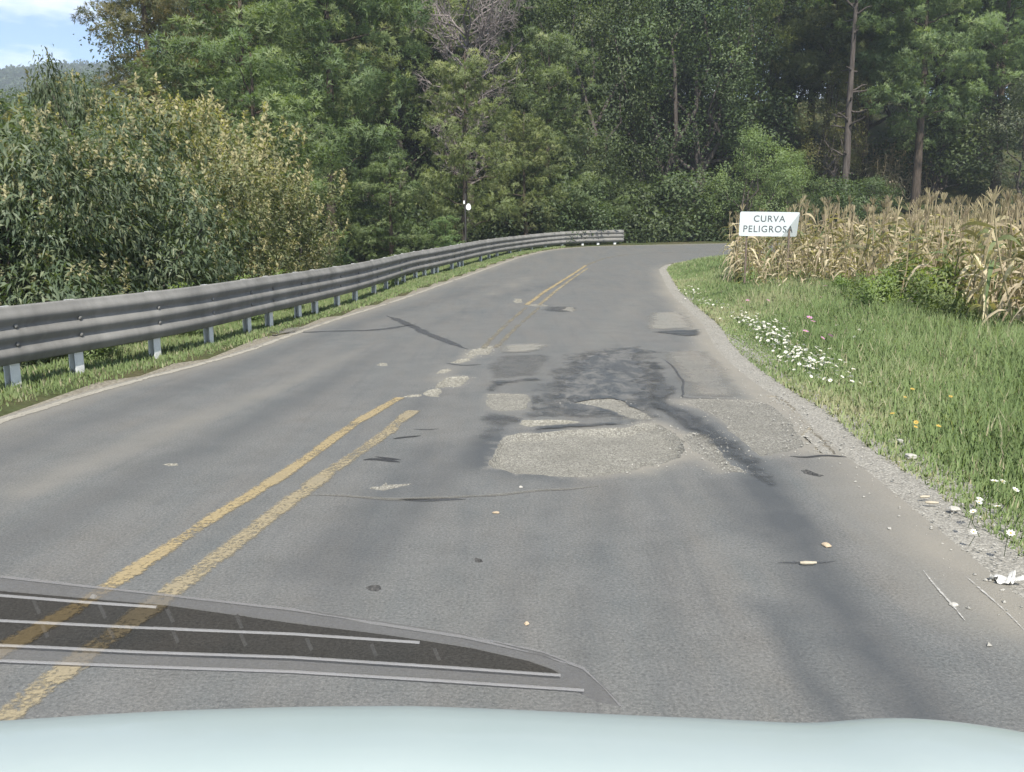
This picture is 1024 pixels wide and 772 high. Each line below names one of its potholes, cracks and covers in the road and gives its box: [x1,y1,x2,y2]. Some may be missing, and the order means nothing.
pothole [488,423,685,477]
